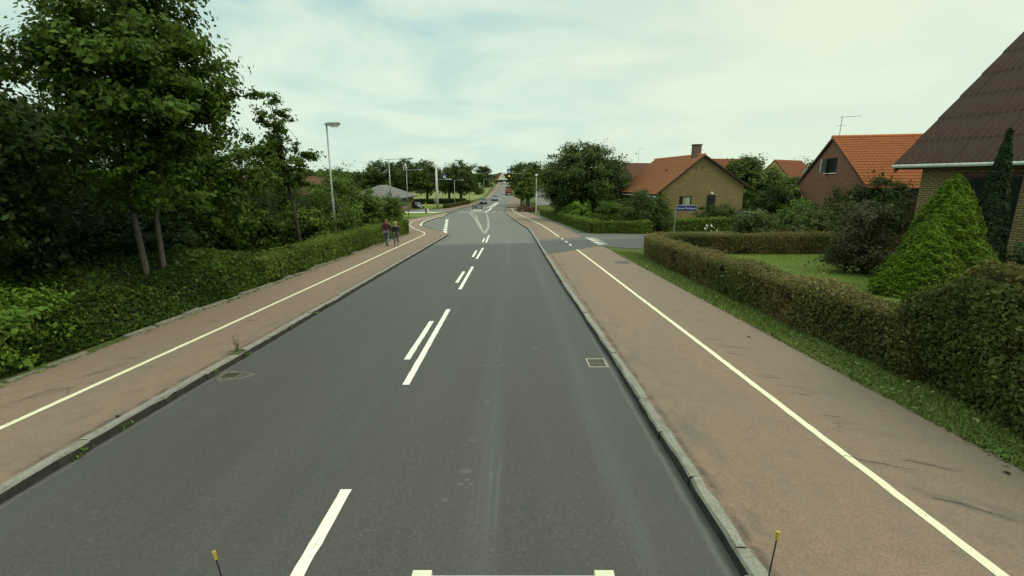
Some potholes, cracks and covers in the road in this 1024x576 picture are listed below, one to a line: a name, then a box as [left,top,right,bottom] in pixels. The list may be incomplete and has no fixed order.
drain grate [585,358,609,368]
